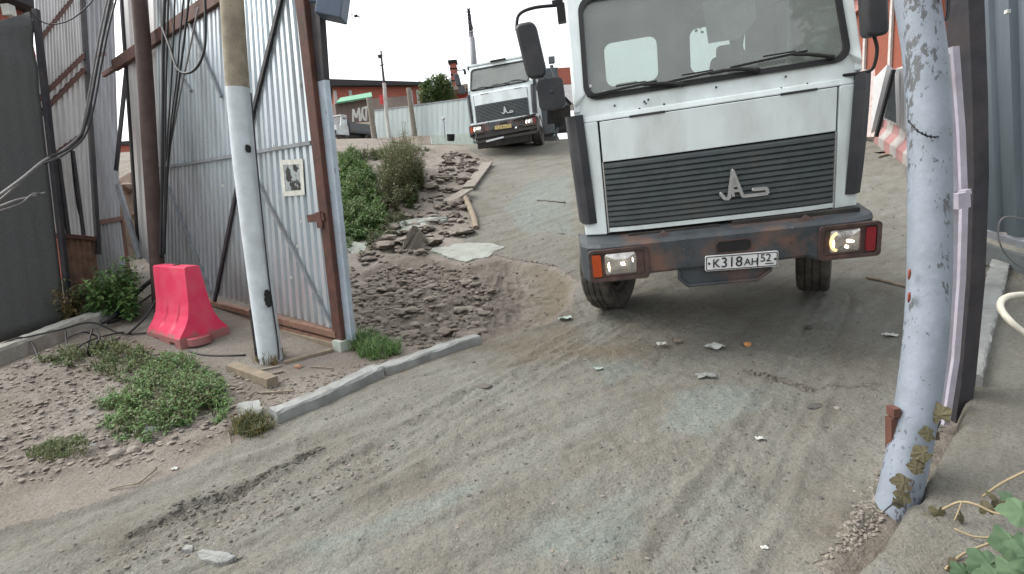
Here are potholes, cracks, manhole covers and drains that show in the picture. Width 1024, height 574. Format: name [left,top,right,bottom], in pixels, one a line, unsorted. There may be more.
crack [746,369,880,392]
